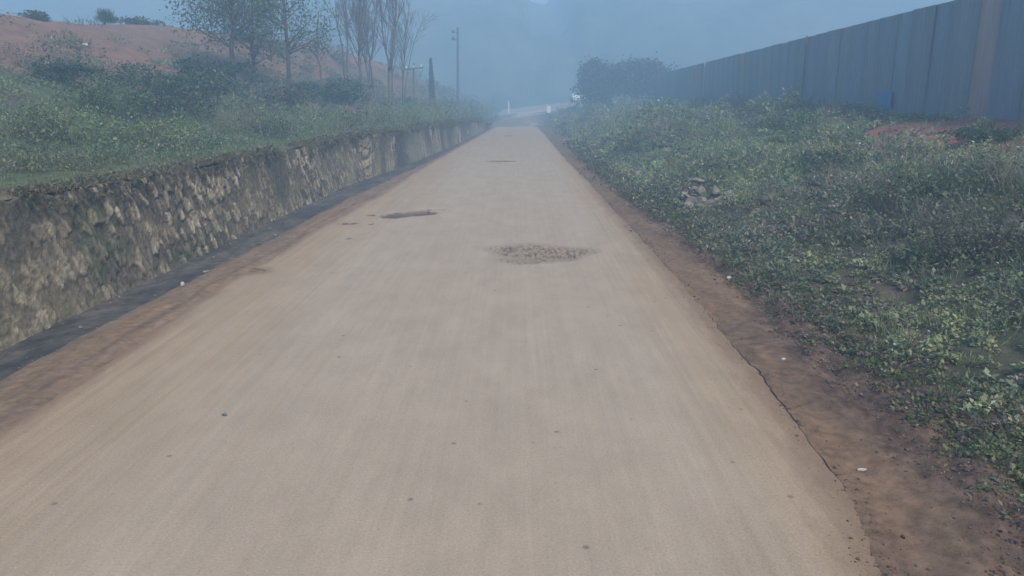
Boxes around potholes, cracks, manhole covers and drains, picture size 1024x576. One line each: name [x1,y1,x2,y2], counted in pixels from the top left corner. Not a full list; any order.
pothole [379,209,447,219]
